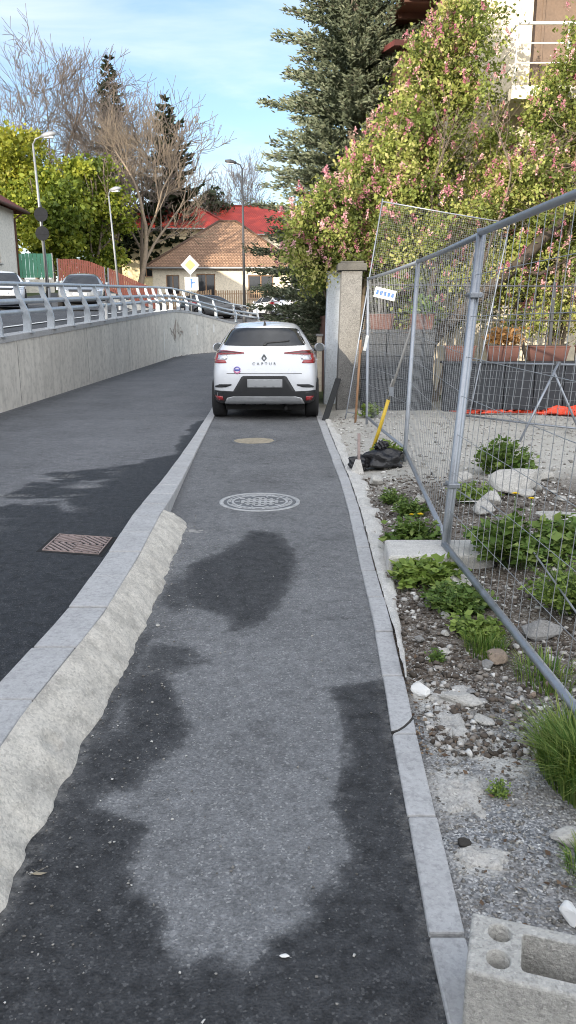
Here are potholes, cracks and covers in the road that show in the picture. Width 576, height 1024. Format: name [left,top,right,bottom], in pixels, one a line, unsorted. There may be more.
manhole cover [219,493,300,512]
drain grate [36,533,118,557]
